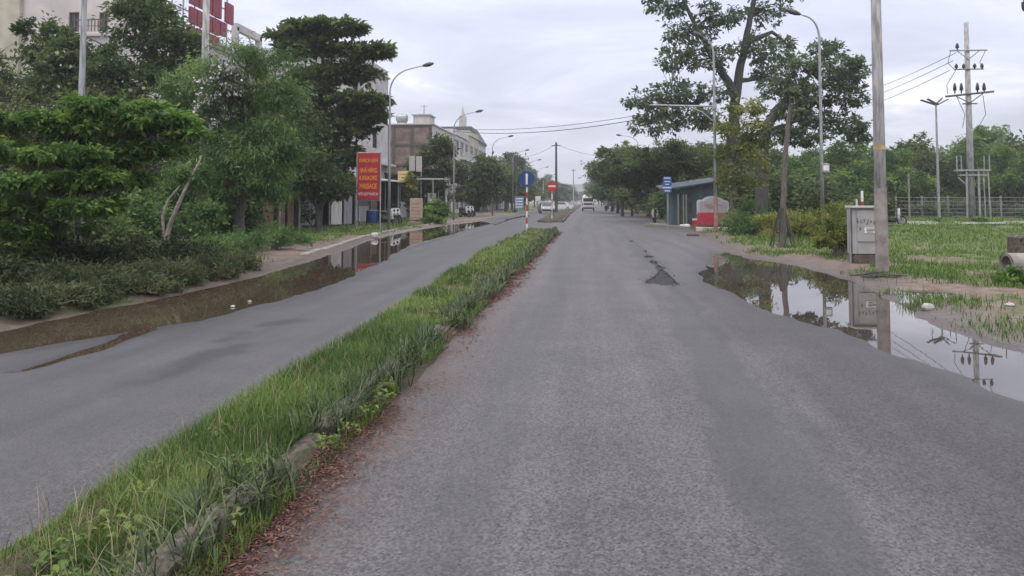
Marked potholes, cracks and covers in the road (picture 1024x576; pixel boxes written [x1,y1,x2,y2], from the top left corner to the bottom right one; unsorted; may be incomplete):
pothole [636,268,685,286]
